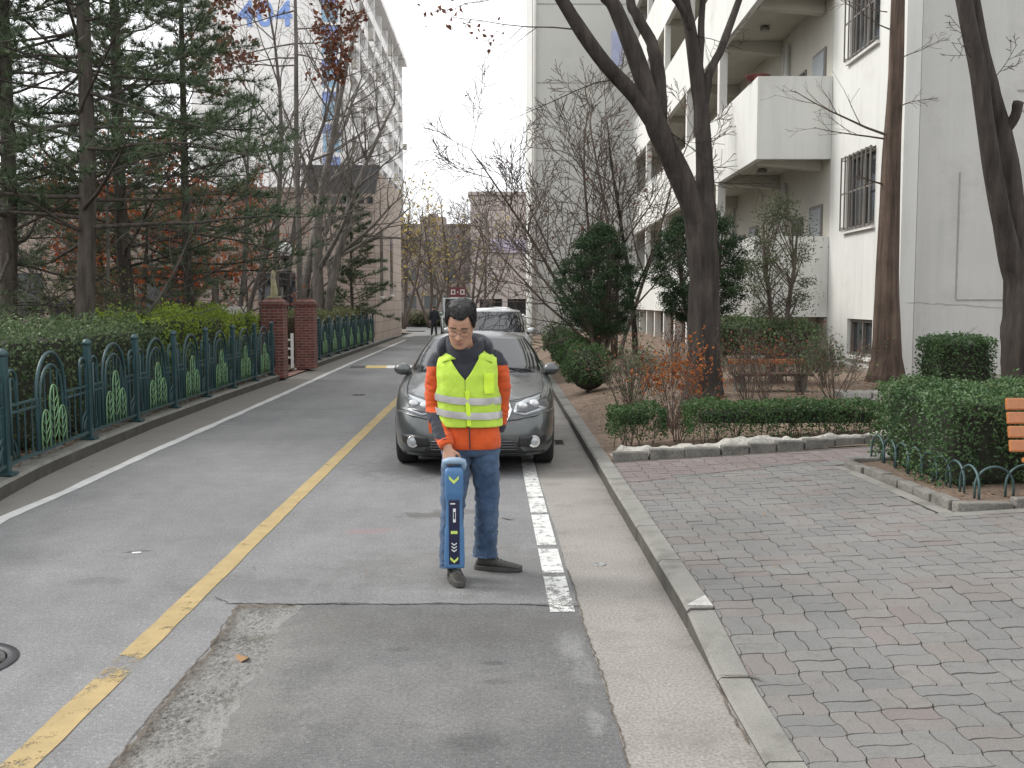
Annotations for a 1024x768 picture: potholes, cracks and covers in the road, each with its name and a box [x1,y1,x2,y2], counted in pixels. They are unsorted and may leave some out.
manhole cover [0,643,20,671]
